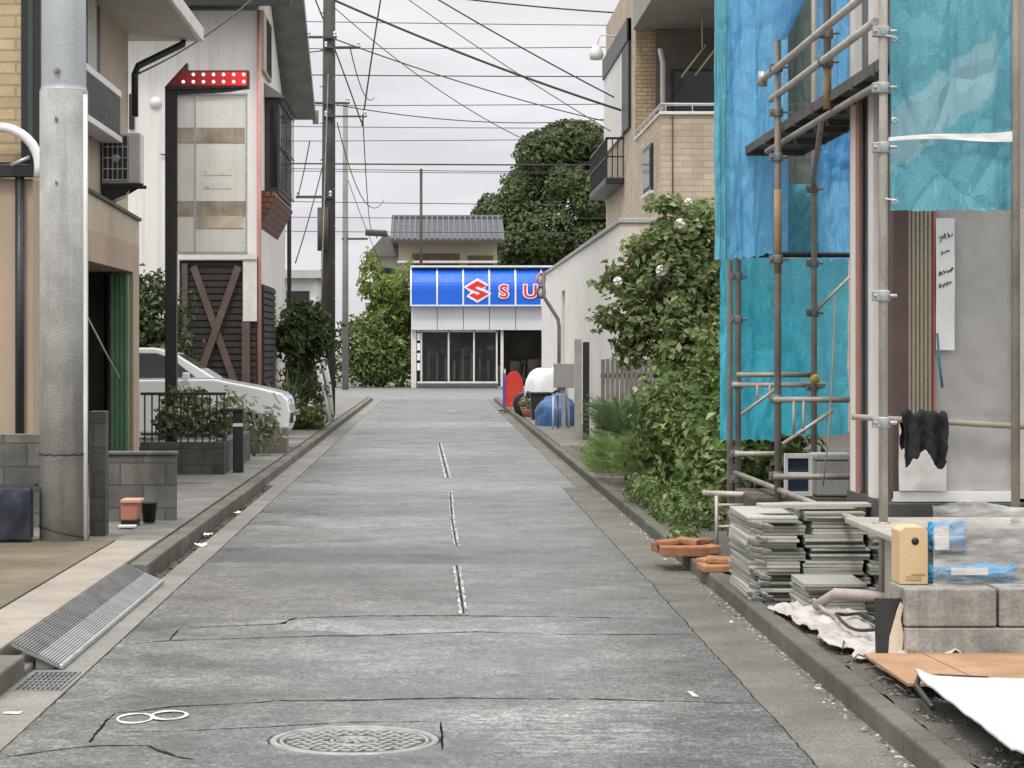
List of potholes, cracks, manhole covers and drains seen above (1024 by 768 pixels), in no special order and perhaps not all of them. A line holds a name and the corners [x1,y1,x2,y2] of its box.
drain grate [11,671,81,691]
manhole cover [270,725,439,755]
crack [20,698,735,760]
crack [161,616,500,642]
